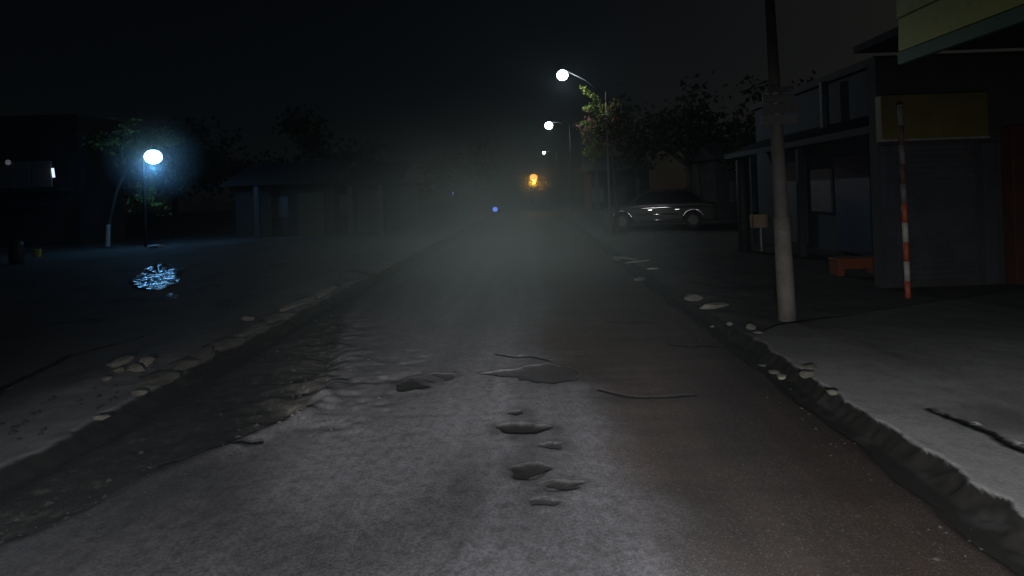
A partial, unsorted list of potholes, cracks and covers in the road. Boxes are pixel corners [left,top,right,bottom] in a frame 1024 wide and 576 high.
pothole [499,458,564,486]
pothole [474,362,587,386]
pothole [525,473,597,501]
pothole [387,374,445,395]
pothole [501,407,531,419]
crack [596,387,699,401]
crack [492,353,554,362]
pothole [488,419,562,438]
pothole [528,438,572,454]
crack [918,407,1024,456]
